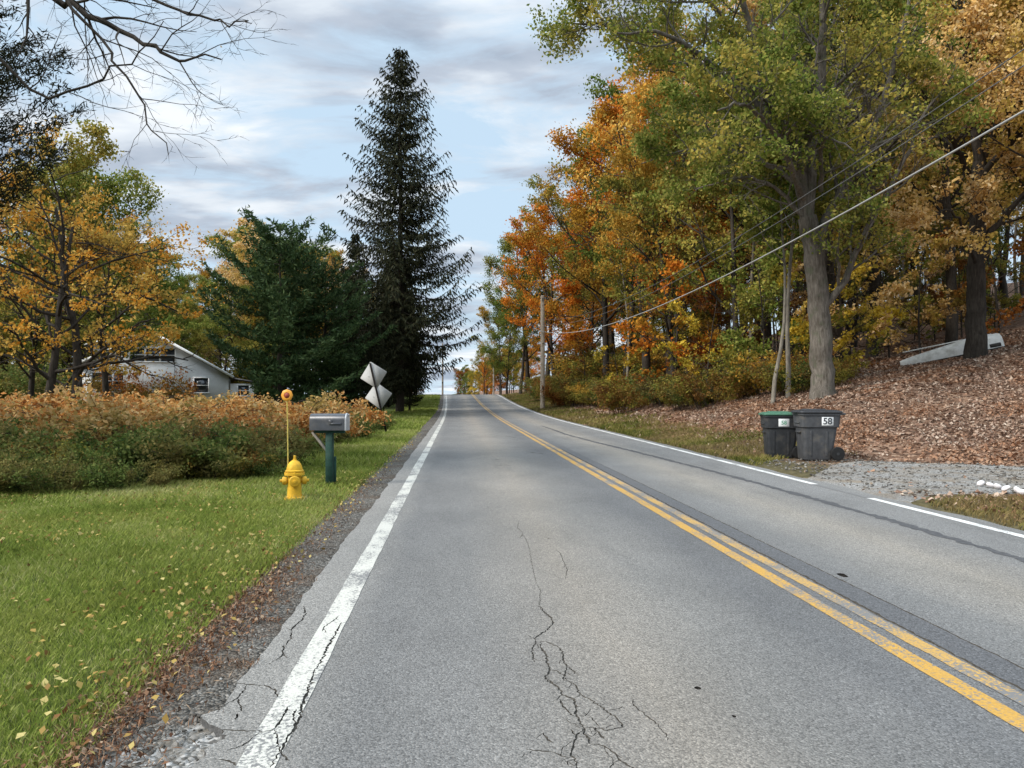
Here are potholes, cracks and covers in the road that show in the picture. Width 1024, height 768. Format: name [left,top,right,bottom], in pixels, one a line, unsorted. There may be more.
crack [519,529,669,768]
crack [219,606,341,765]
